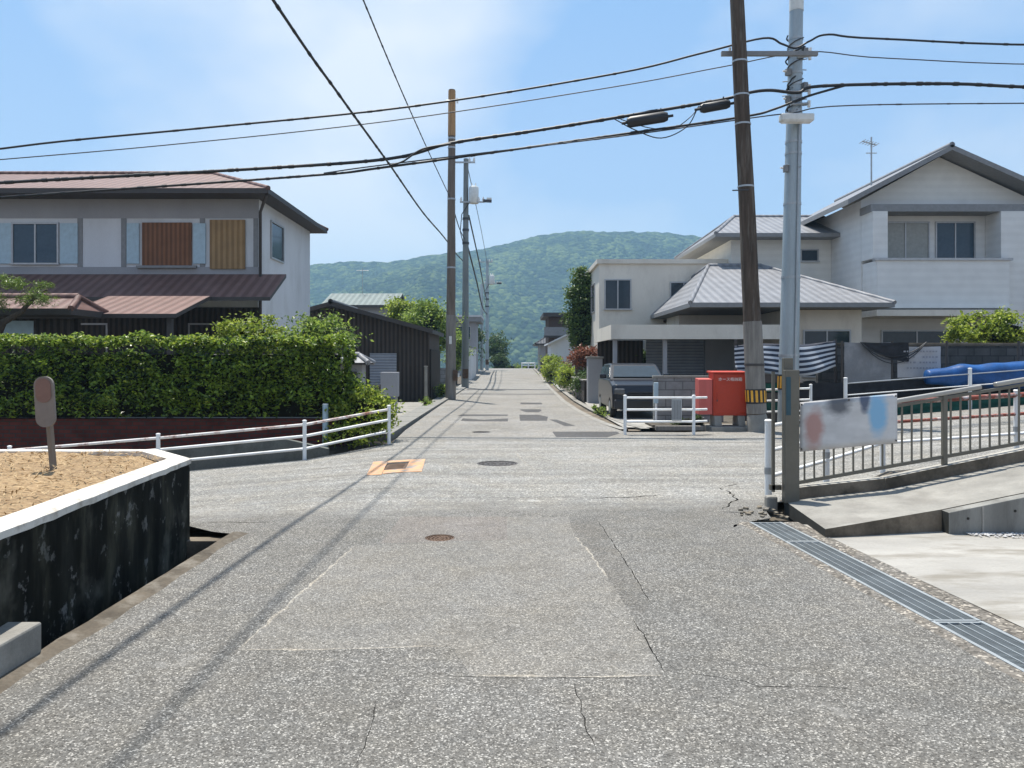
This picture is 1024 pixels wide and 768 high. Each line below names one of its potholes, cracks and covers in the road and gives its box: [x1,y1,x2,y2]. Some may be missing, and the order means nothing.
crack [599,523,652,604]
drain grate [931,621,1024,672]
drain grate [749,522,819,542]
drain grate [784,541,981,622]
crack [463,676,633,748]
